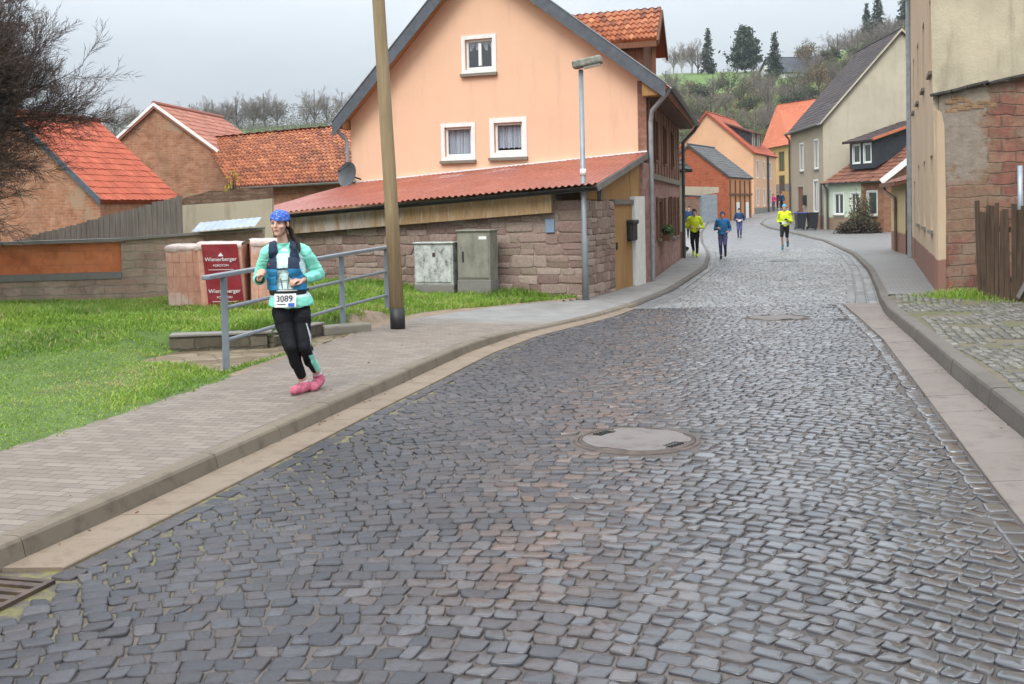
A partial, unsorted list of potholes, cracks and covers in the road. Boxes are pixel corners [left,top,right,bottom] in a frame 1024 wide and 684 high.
drain grate [0,575,56,611]
manhole cover [573,427,701,455]
